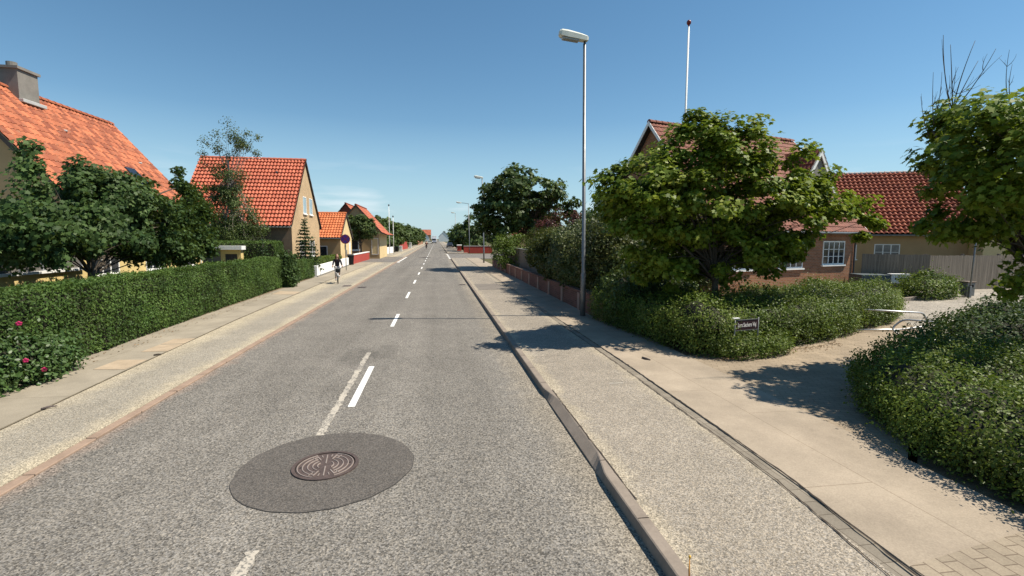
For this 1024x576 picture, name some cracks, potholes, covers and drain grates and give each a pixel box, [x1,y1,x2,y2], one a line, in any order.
manhole cover [291,451,359,481]
